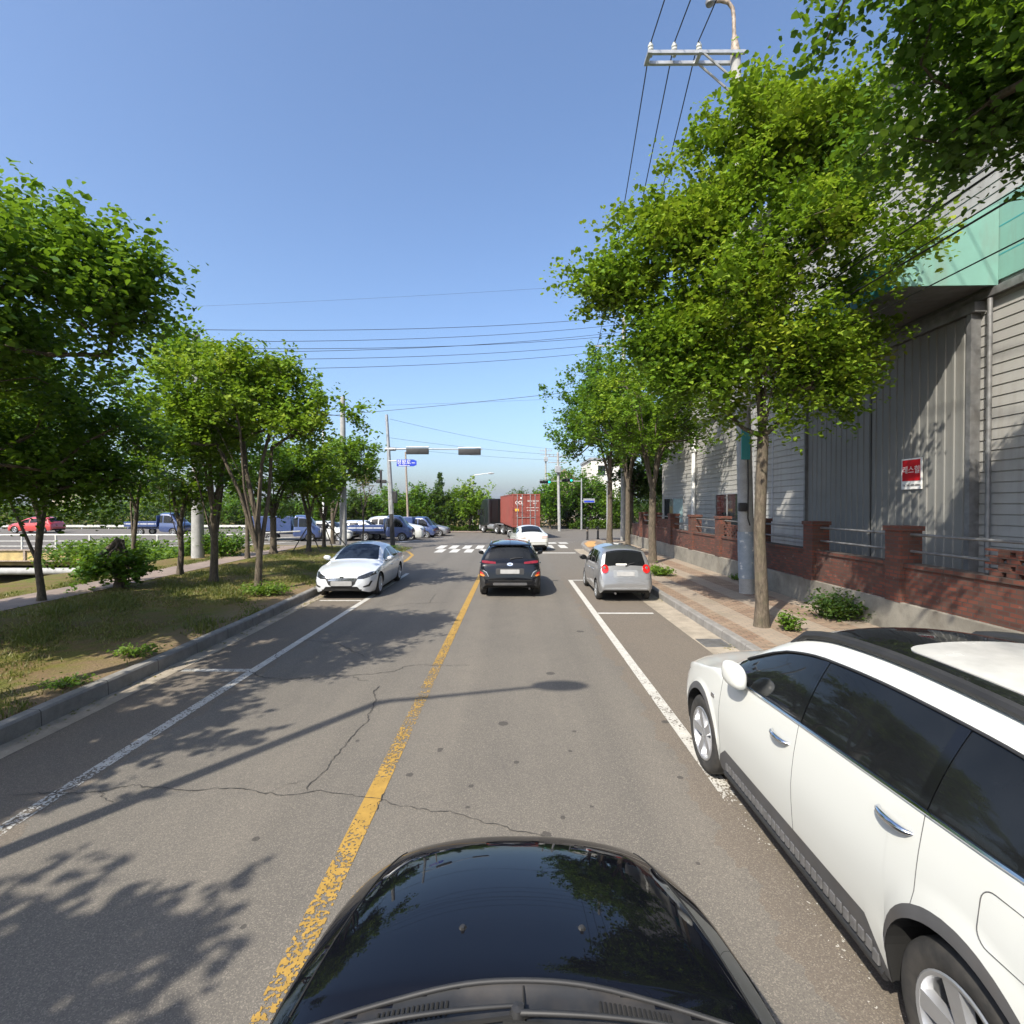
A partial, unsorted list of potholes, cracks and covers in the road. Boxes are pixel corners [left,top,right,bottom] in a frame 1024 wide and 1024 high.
crack [19,640,542,836]
